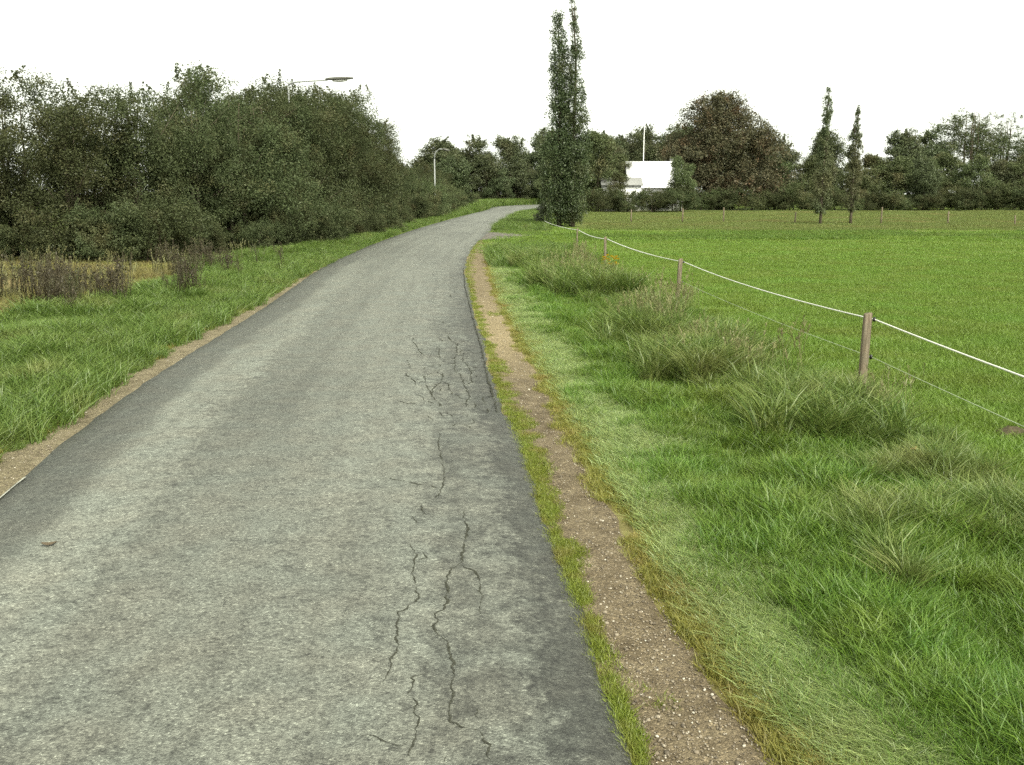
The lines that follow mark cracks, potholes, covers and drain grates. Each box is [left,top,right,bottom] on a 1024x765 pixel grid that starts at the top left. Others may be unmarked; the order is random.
crack [400,268,498,442]
crack [391,431,445,523]
crack [361,512,492,761]
